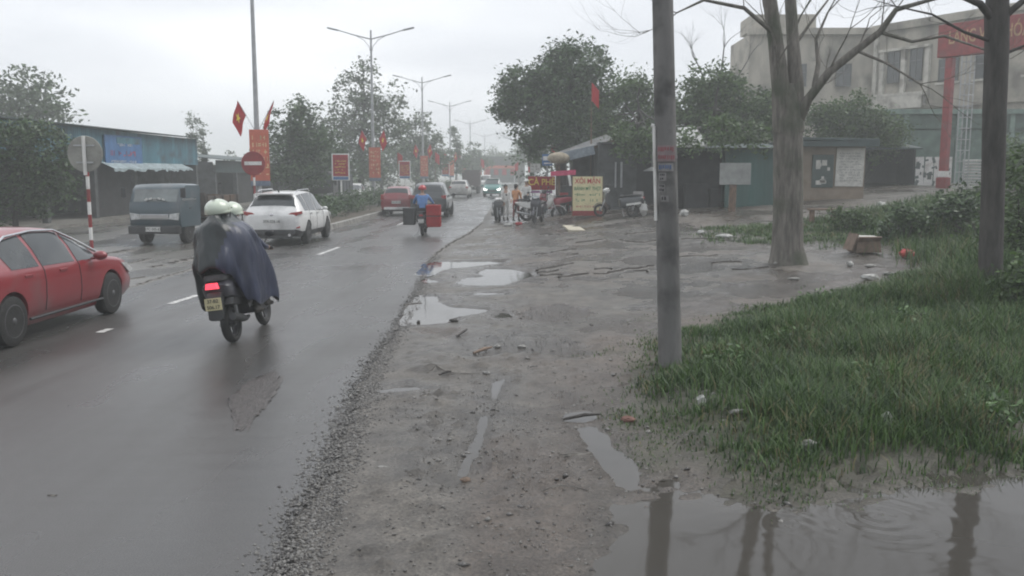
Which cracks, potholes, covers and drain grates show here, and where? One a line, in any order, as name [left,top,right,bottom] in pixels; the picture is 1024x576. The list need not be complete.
crack [426,221,656,278]
pothole [400,294,503,326]
pothole [554,423,665,492]
pothole [454,266,542,287]
pothole [441,372,517,488]
pothole [414,258,515,277]
